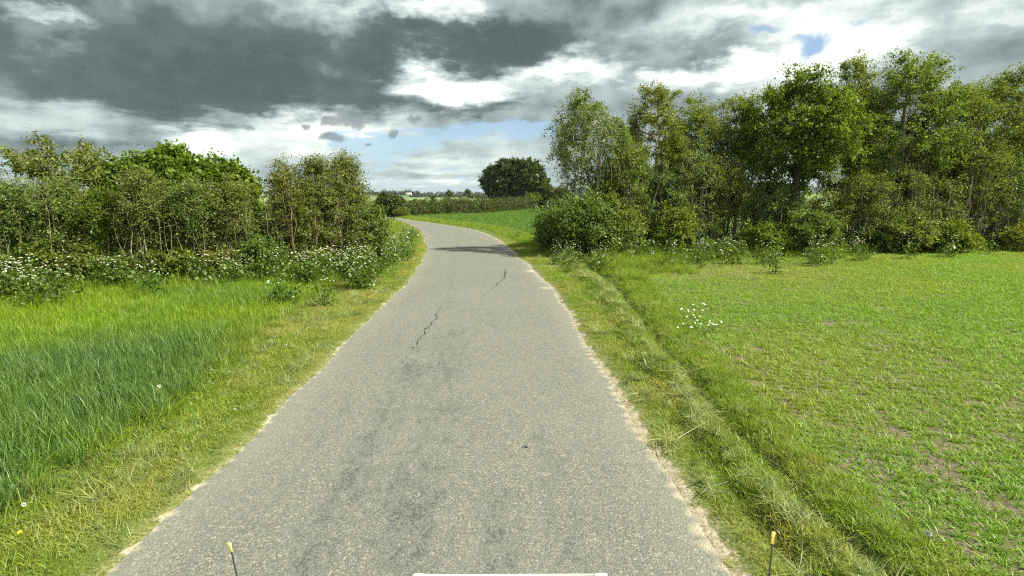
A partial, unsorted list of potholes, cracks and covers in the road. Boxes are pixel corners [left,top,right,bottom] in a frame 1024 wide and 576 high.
crack [402,305,443,378]
